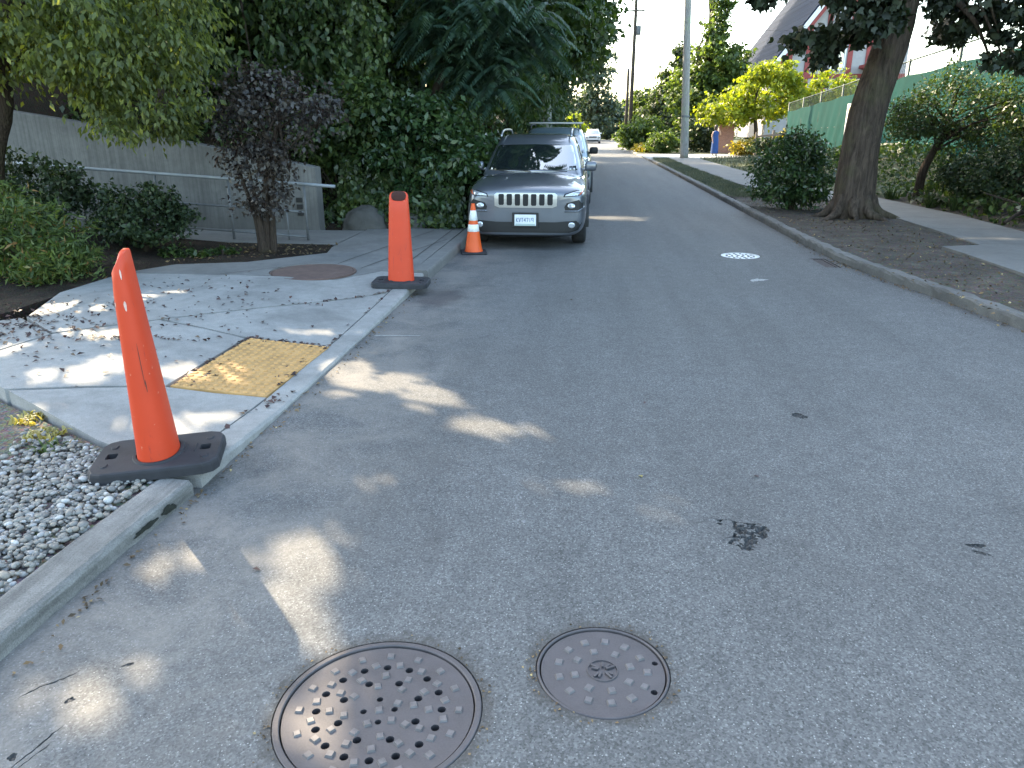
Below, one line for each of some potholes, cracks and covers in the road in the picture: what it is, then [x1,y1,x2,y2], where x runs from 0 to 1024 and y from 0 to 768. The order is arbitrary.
crack [11,725,64,768]
crack [19,673,76,698]
manhole cover [269,264,356,280]
pothole [707,518,770,551]
manhole cover [272,642,482,768]
drain grate [811,259,840,268]
manhole cover [536,628,670,720]
